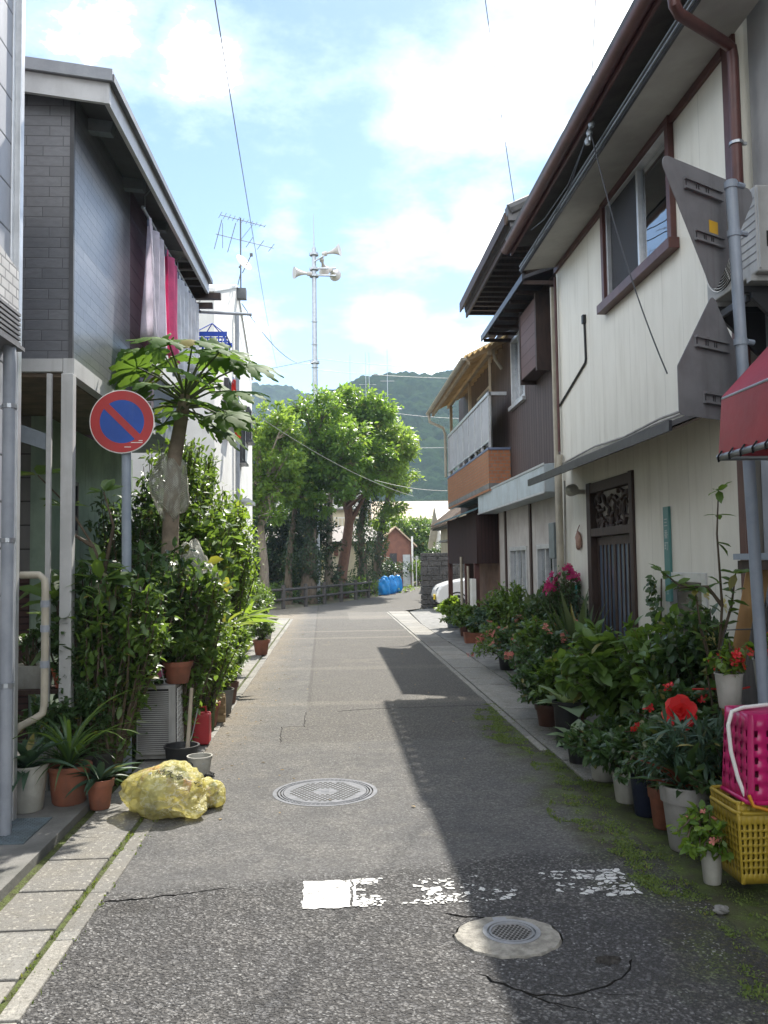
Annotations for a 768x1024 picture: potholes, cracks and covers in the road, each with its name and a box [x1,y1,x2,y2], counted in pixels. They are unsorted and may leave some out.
crack [104,887,232,902]
manhole cover [273,778,377,807]
crack [479,959,634,1014]
crack [444,913,485,921]
